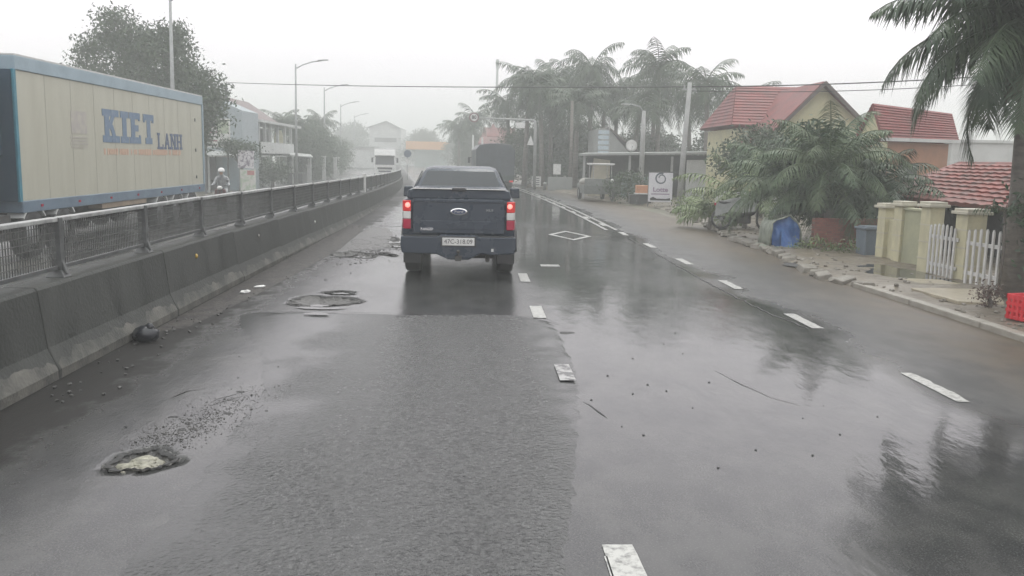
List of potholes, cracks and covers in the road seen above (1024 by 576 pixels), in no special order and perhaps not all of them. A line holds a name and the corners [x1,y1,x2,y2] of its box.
pothole [102,446,182,474]
pothole [287,295,365,307]
